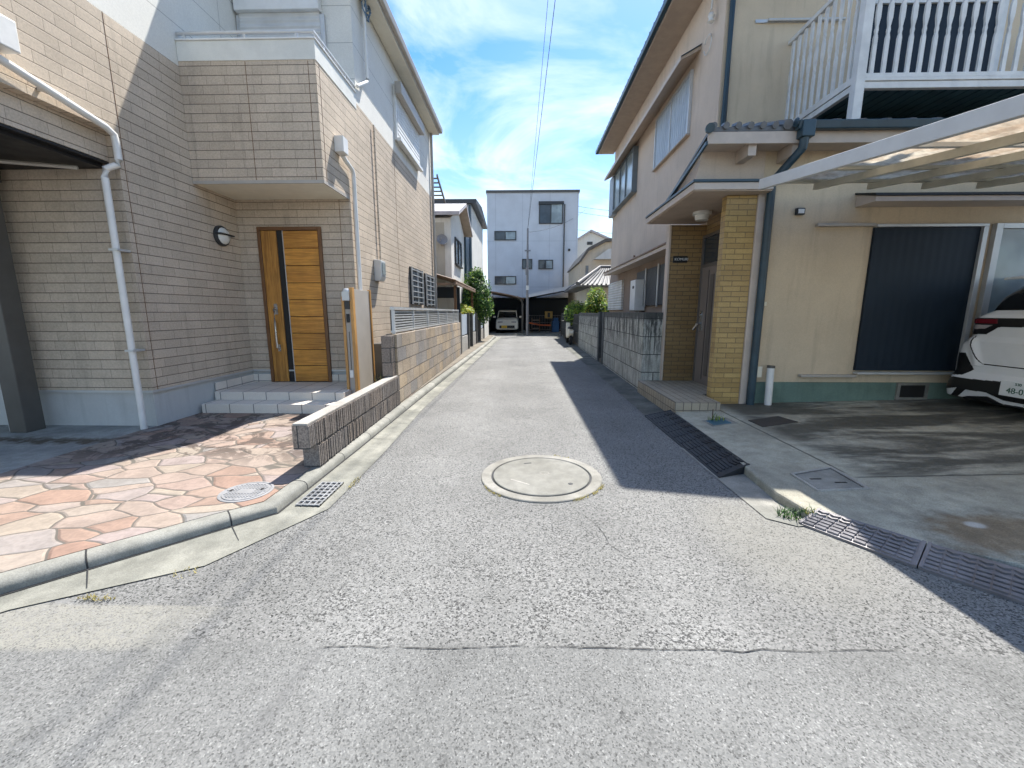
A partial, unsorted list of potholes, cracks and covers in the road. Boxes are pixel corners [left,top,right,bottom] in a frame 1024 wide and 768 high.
drain grate [295,481,344,507]
manhole cover [790,466,870,492]
manhole cover [481,455,602,504]
manhole cover [748,416,798,427]
manhole cover [217,482,274,503]
